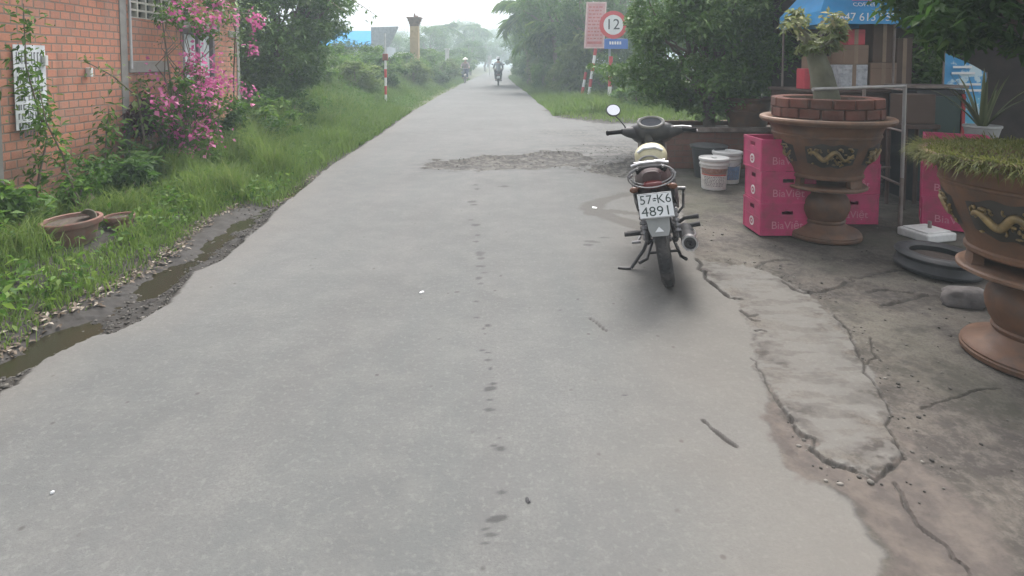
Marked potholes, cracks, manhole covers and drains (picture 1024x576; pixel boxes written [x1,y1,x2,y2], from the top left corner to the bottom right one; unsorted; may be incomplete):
crack [693,258,974,576]
crack [585,317,609,332]
pothole [422,150,595,172]
